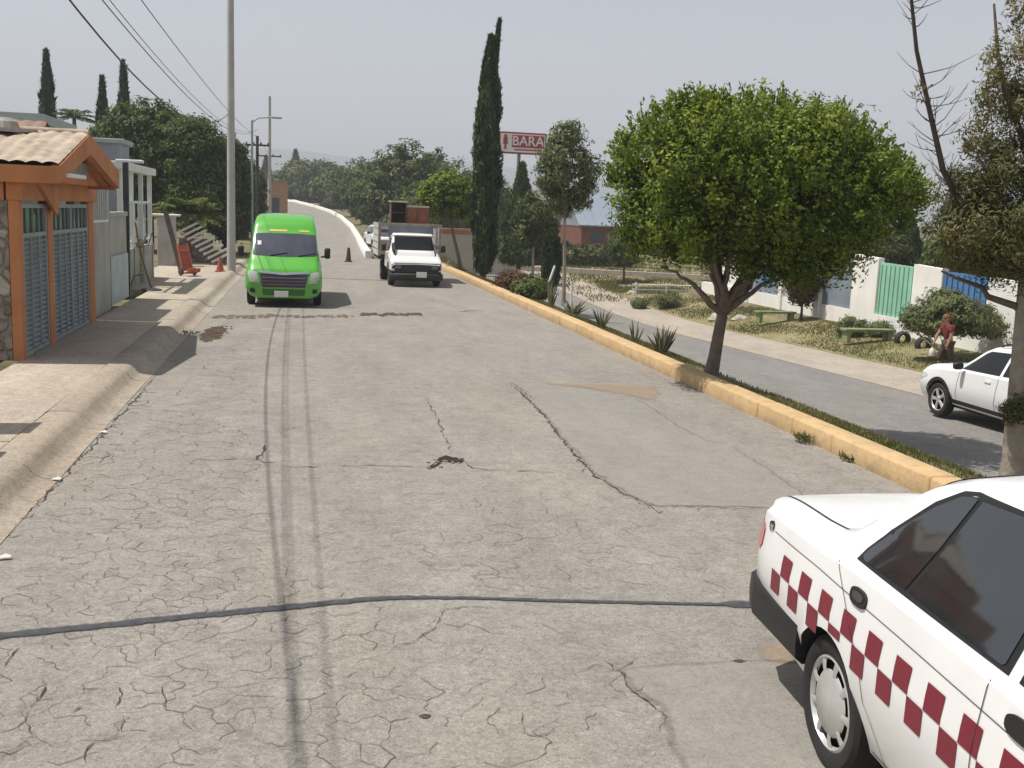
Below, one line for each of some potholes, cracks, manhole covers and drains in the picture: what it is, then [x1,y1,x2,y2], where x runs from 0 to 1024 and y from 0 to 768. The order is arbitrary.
pothole [427,455,467,469]
crack [0,331,756,768]
